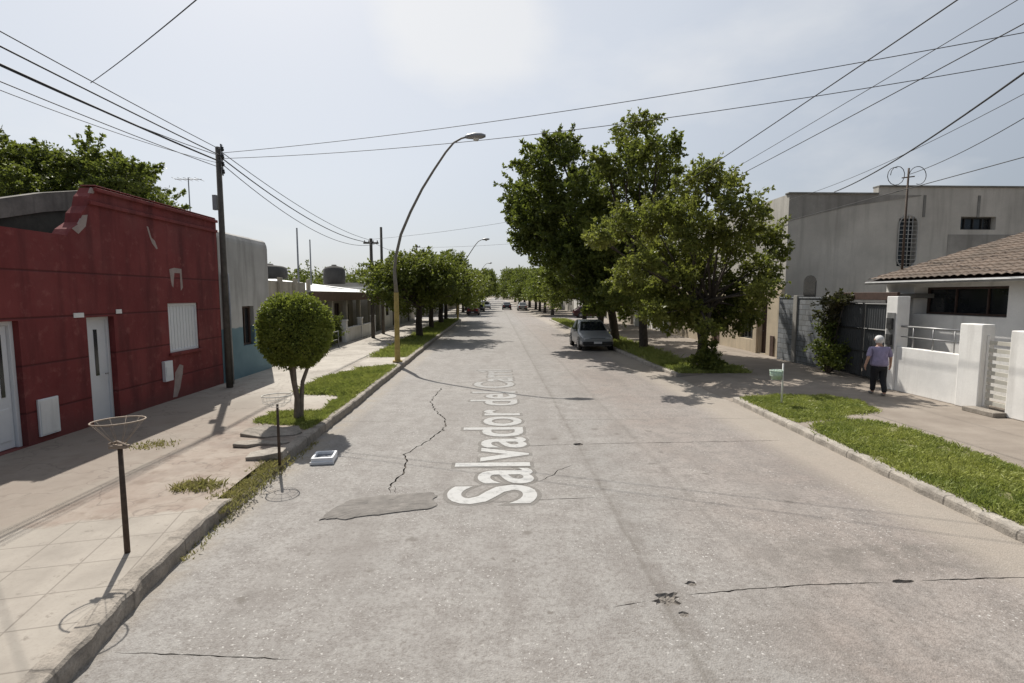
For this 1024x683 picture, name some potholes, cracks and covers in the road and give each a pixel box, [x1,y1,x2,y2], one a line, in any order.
crack [115,652,275,660]
crack [388,388,447,493]
pothole [653,592,681,606]
crack [616,577,1024,607]
